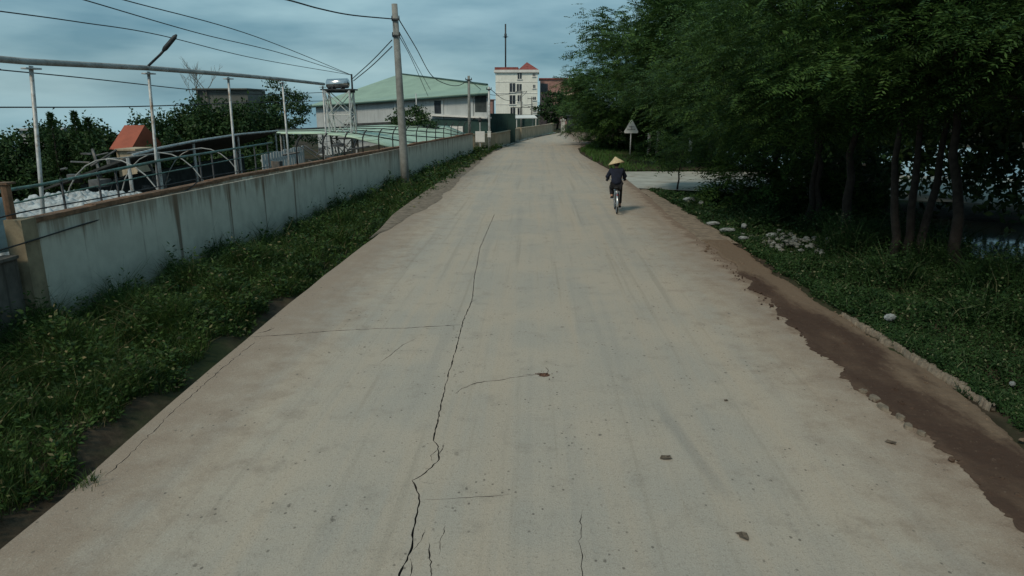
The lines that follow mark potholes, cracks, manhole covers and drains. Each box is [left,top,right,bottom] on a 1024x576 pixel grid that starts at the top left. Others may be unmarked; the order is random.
crack [109,219,531,576]
